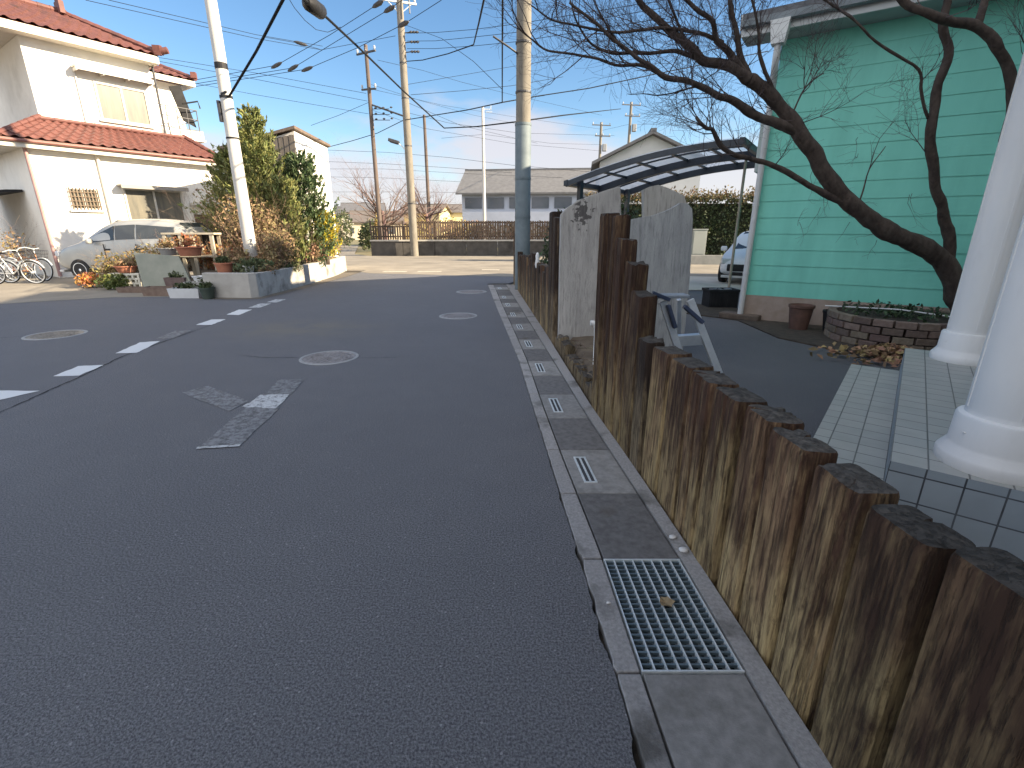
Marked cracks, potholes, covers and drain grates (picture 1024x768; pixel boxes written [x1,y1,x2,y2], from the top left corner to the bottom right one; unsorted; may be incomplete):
drain grate [603,559,745,681]
manhole cover [21,330,88,340]
manhole cover [299,350,359,365]
